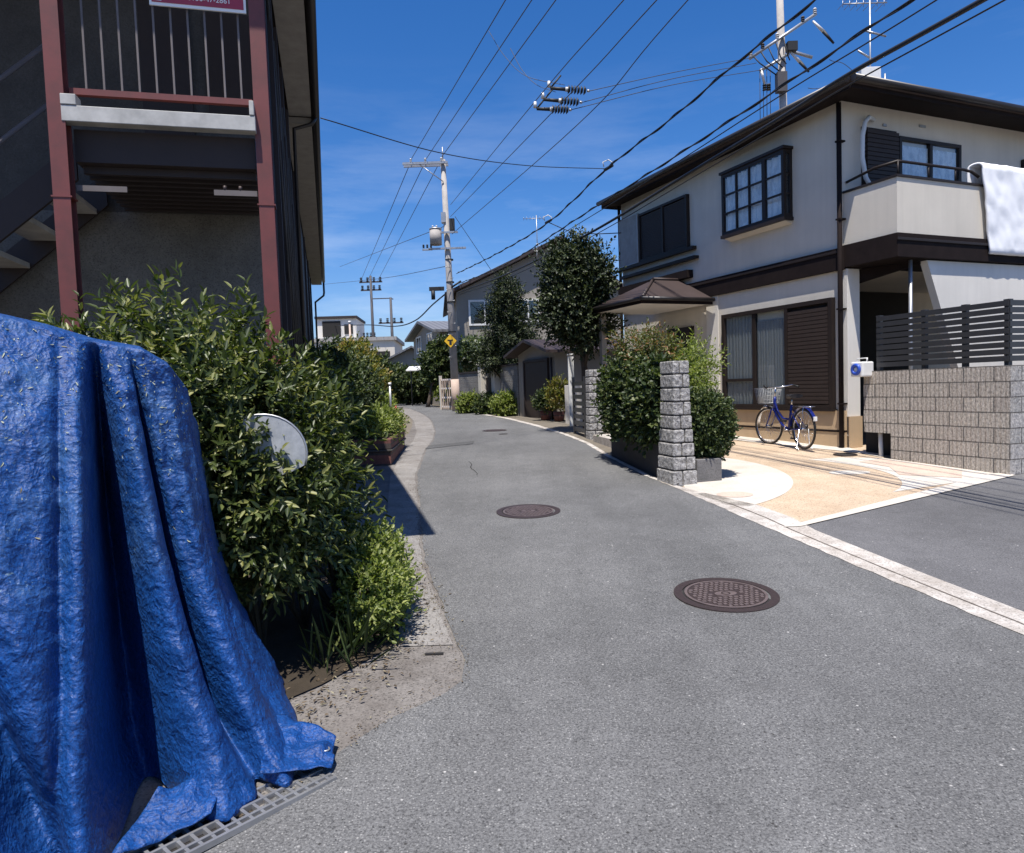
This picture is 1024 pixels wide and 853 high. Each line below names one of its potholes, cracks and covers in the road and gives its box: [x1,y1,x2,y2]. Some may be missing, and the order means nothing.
drain grate [124,768,337,853]
manhole cover [674,578,780,613]
manhole cover [496,504,560,519]
